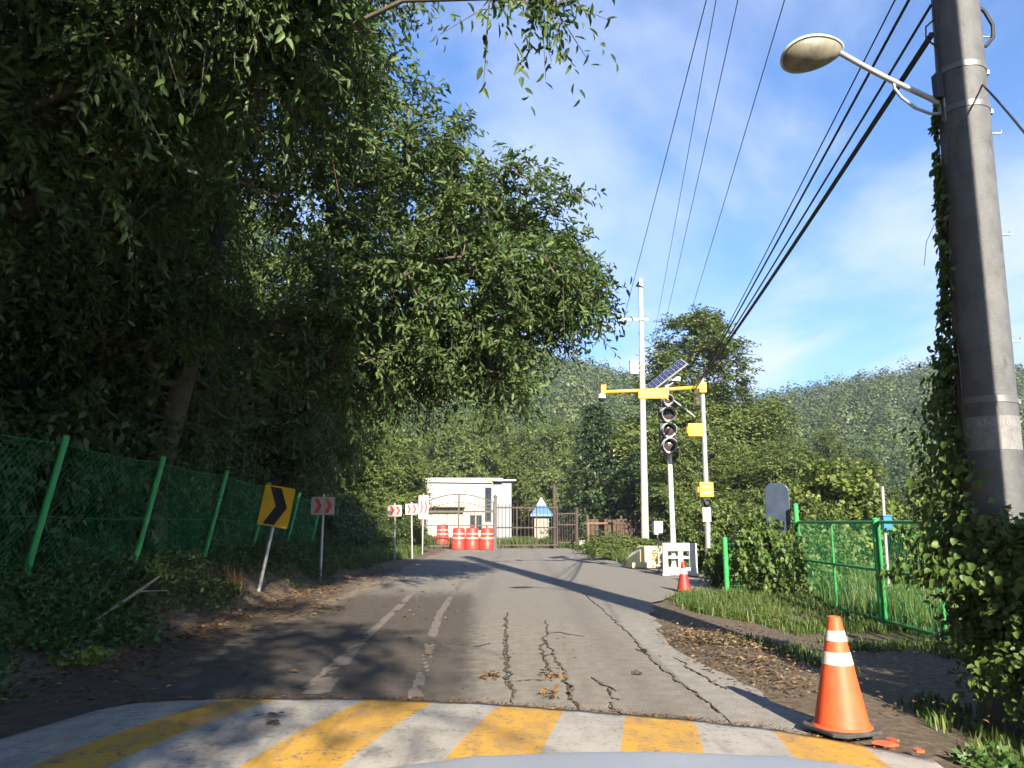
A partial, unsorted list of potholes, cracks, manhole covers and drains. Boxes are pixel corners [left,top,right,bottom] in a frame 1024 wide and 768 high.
crack [474,612,622,714]
crack [673,657,727,690]
